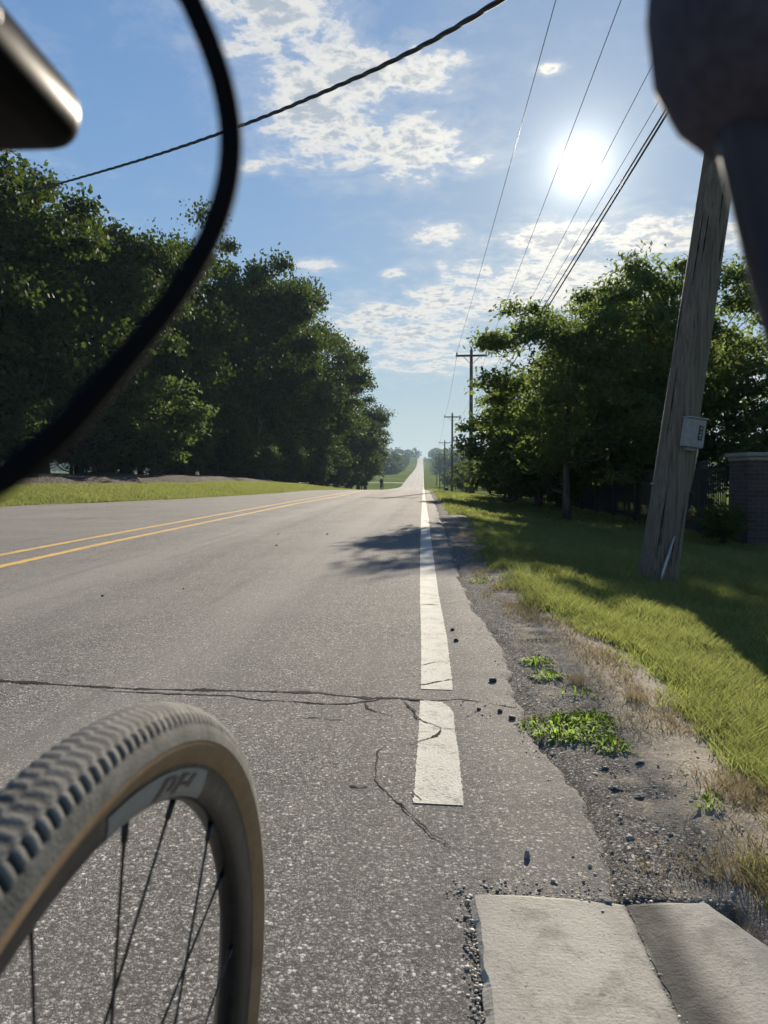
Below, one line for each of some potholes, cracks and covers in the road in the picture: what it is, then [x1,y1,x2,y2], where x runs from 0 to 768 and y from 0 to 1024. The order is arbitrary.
crack [0,660,516,743]
crack [350,744,456,850]
